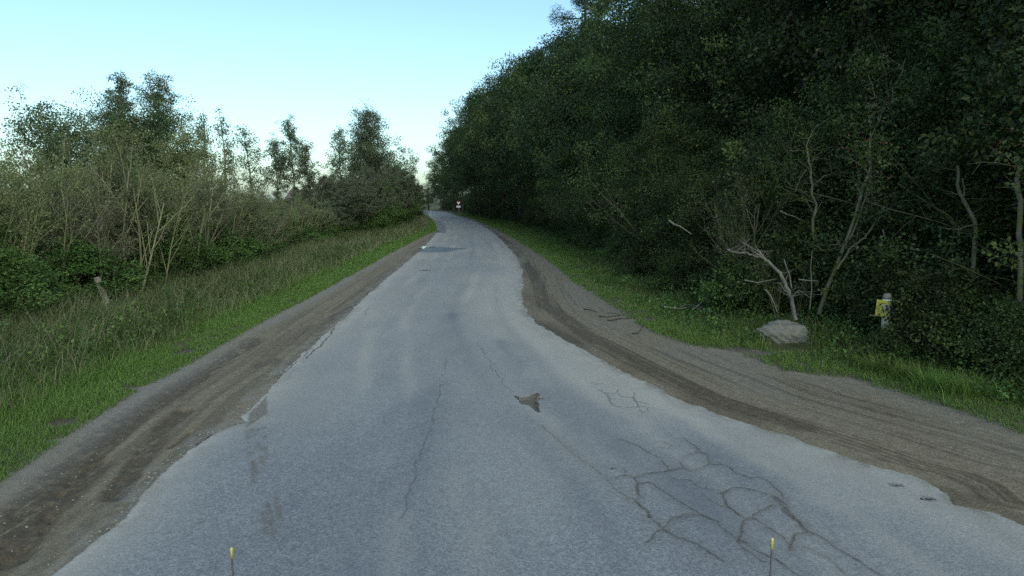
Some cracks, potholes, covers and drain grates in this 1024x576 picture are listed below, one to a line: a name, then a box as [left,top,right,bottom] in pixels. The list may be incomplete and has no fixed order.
pothole [514,392,547,412]
crack [630,442,860,572]
